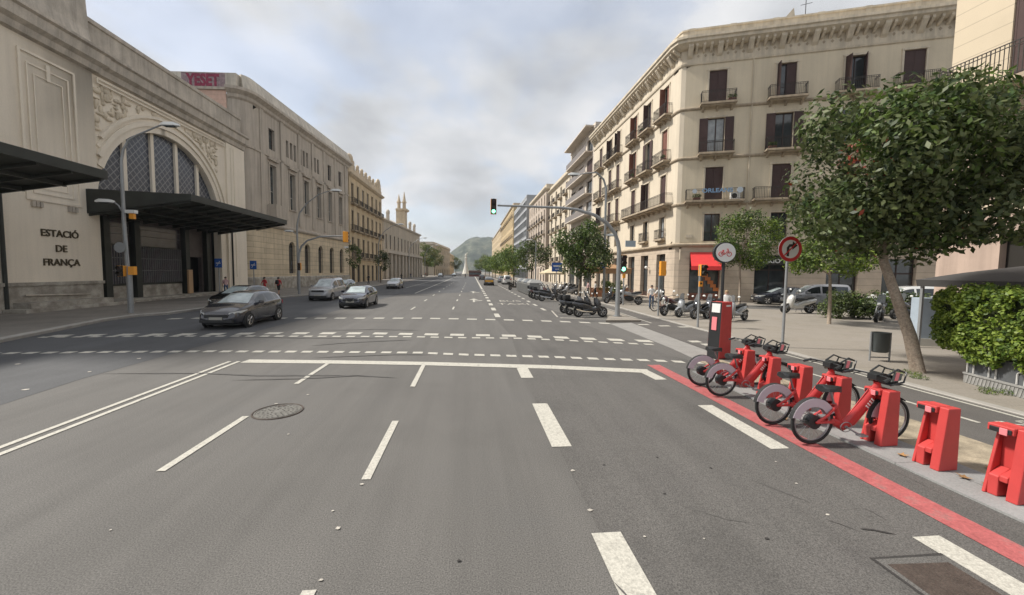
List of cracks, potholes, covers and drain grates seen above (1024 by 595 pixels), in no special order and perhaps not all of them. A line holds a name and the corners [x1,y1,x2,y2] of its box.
utility cover [871,553,1010,595]
crack [756,481,894,534]
manhole cover [251,403,304,420]
